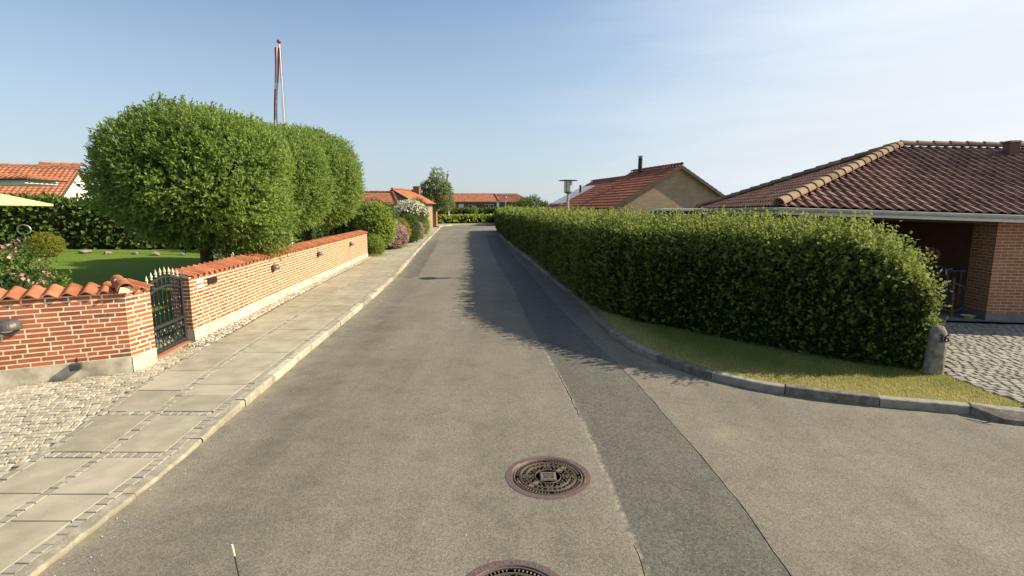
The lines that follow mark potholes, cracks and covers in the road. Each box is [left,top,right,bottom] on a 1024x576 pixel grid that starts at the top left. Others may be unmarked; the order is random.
manhole cover [466,559,560,576]
manhole cover [505,456,591,500]
